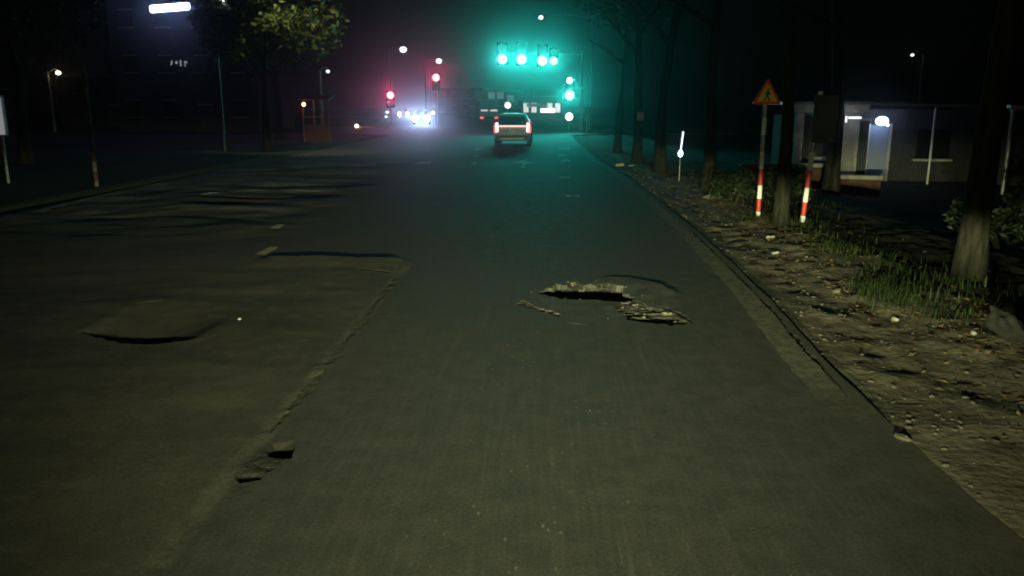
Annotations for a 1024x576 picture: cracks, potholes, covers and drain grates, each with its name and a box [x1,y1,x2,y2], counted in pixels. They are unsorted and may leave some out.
crack [270,258,399,433]
pothole [538,281,689,326]
pothole [73,298,245,345]
pothole [235,441,295,483]
